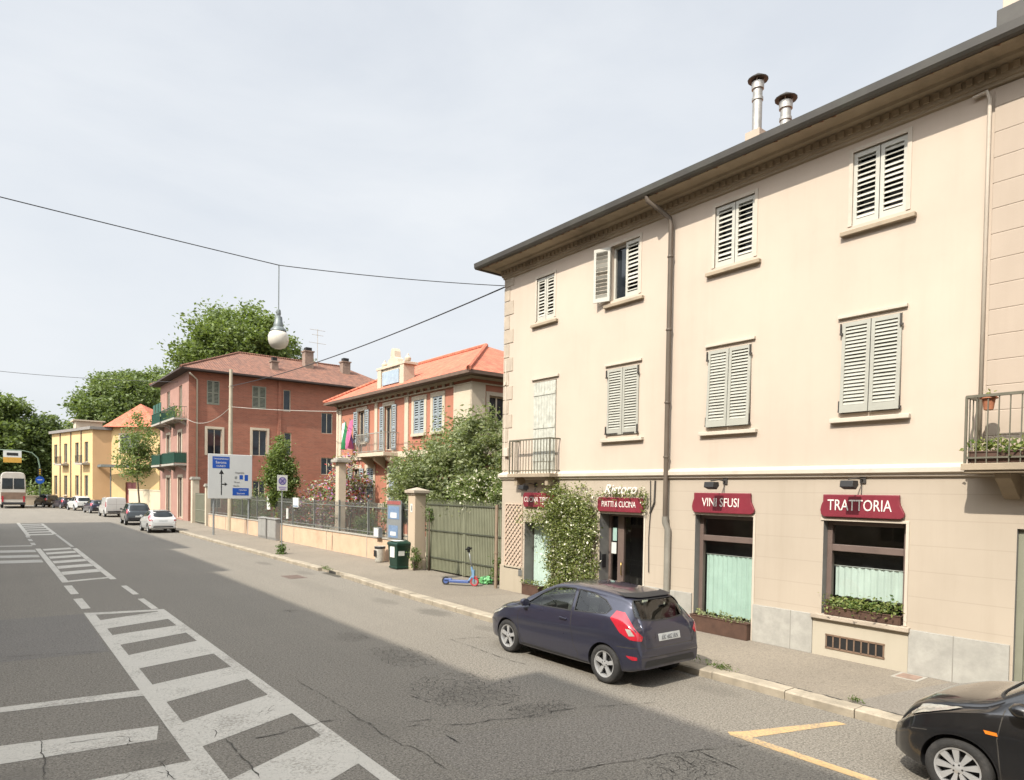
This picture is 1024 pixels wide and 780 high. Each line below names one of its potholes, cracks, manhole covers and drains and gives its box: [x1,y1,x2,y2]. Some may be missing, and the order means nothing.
crack [209,717,373,778]
crack [554,744,750,780]
utility cover [891,672,928,682]
